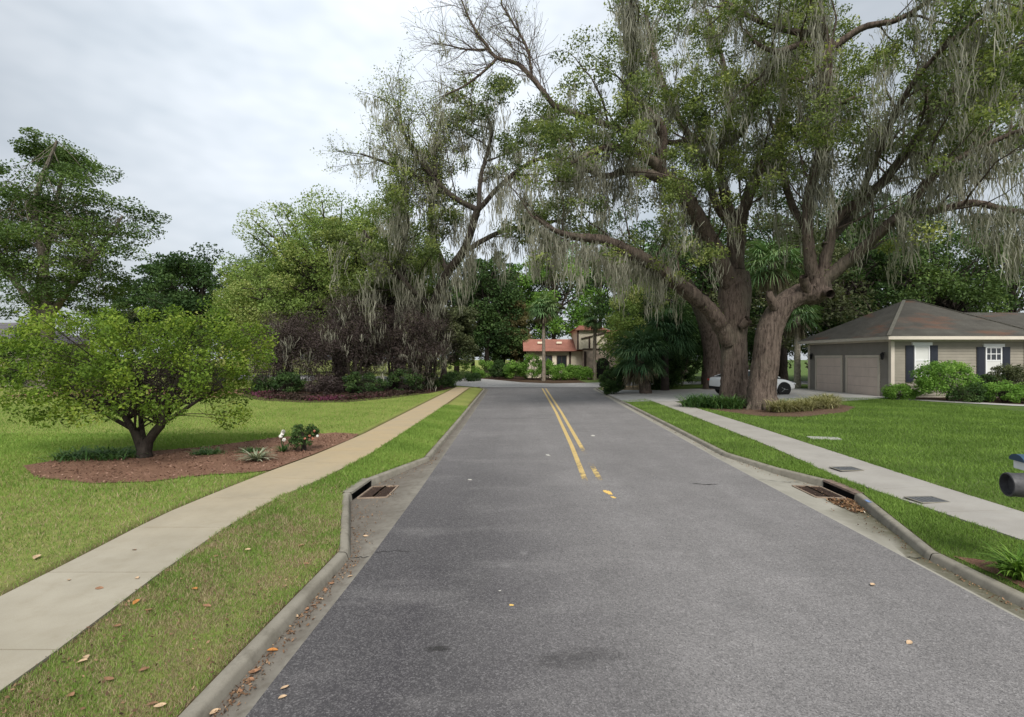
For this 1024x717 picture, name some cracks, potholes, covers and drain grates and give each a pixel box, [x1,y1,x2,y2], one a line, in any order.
utility cover [904,496,950,504]
drain grate [792,479,865,500]
drain grate [343,478,399,500]
